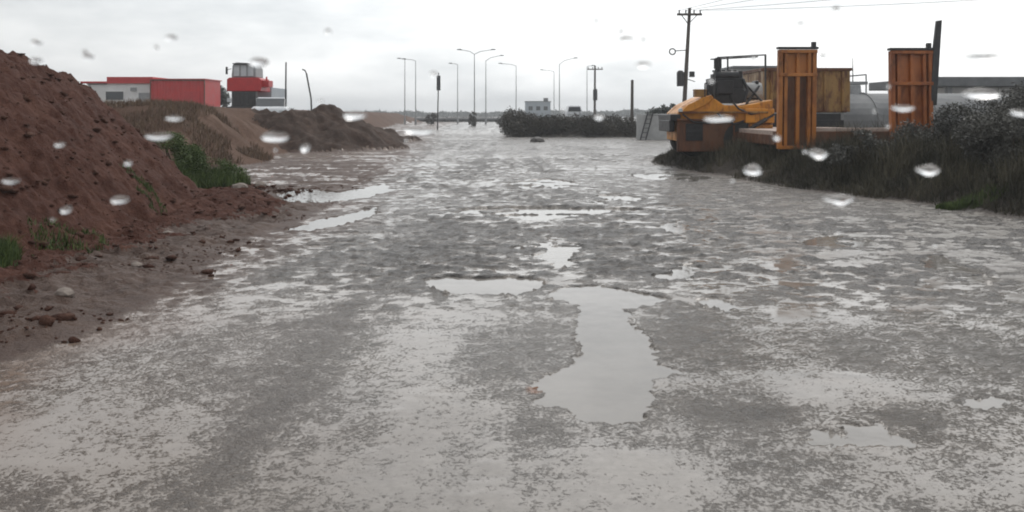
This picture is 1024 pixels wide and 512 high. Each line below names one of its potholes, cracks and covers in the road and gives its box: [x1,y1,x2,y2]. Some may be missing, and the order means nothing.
pothole [273,205,387,233]
pothole [519,282,694,431]
pothole [410,273,556,298]
pothole [505,238,592,271]
pothole [791,416,928,454]
